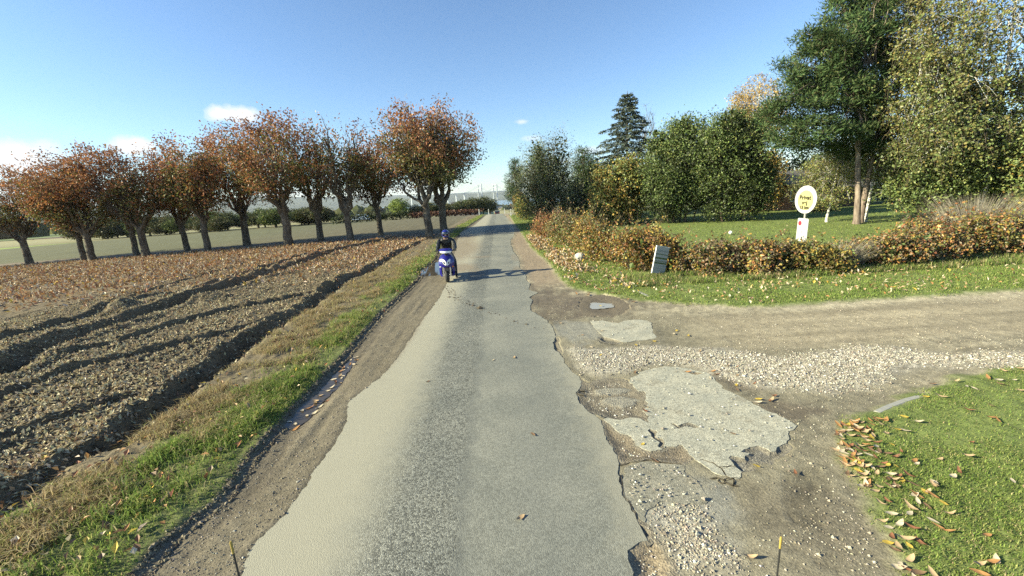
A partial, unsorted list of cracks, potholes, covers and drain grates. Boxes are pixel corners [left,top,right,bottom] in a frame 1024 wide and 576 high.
pothole [636,516,656,547]
pothole [627,536,678,576]
pothole [576,378,649,423]
